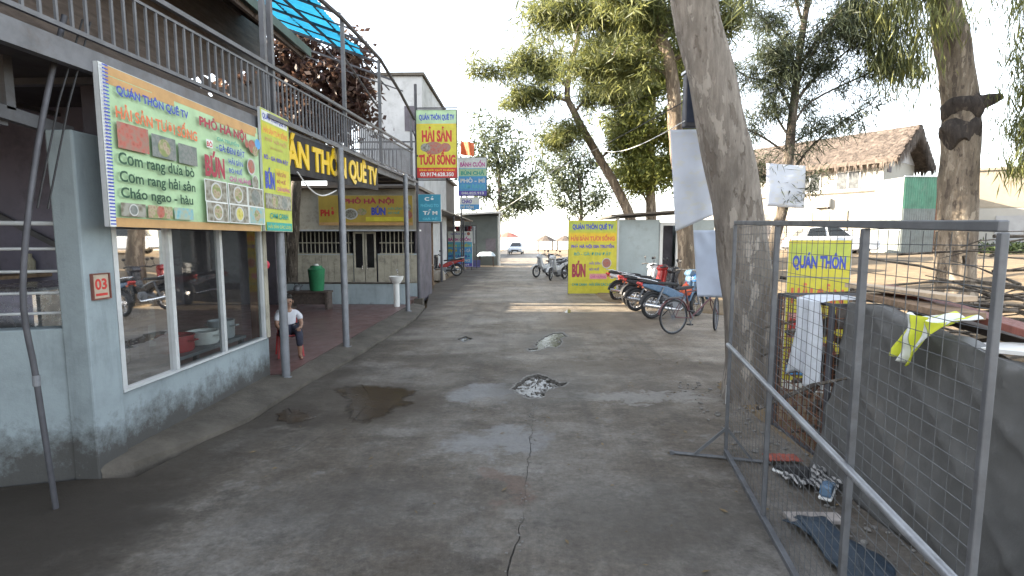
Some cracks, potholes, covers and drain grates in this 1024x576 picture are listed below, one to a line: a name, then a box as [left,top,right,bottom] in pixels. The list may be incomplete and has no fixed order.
crack [504,403,537,576]
pothole [508,373,570,399]
pothole [525,332,569,352]
